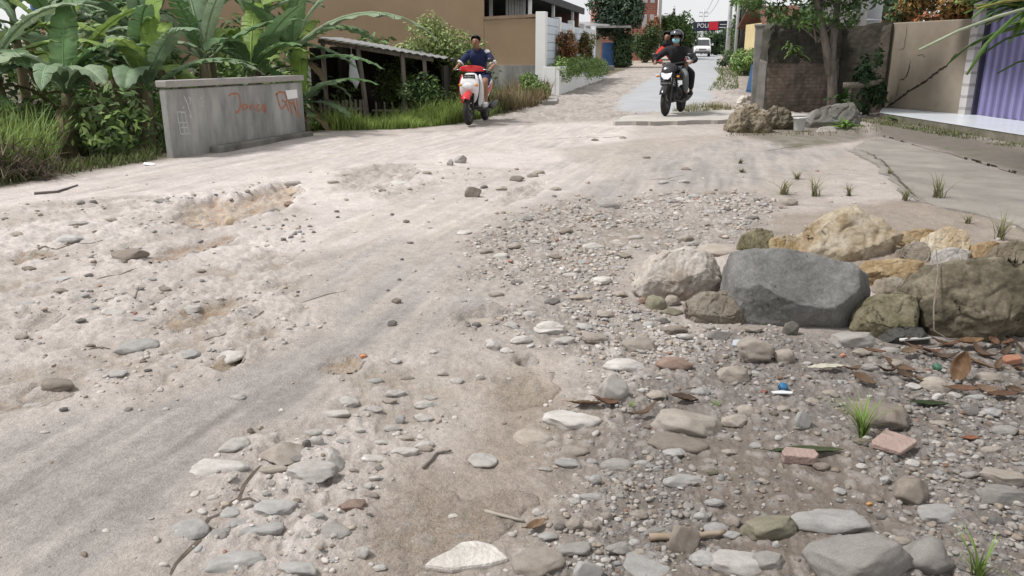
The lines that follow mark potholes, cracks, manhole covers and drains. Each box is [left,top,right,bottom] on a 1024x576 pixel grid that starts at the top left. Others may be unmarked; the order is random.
pothole [326,162,421,193]
pothole [208,348,247,372]
pothole [178,182,305,229]
pothole [319,354,366,375]
crack [860,135,1023,198]
